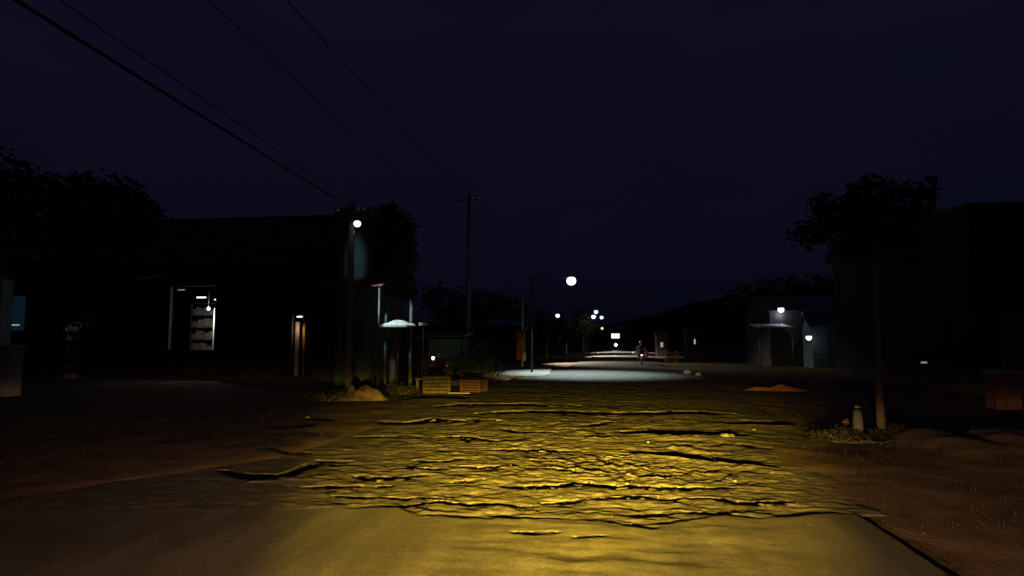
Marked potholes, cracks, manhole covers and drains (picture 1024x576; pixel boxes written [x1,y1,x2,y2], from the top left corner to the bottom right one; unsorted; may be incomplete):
crack [209,402,799,519]
